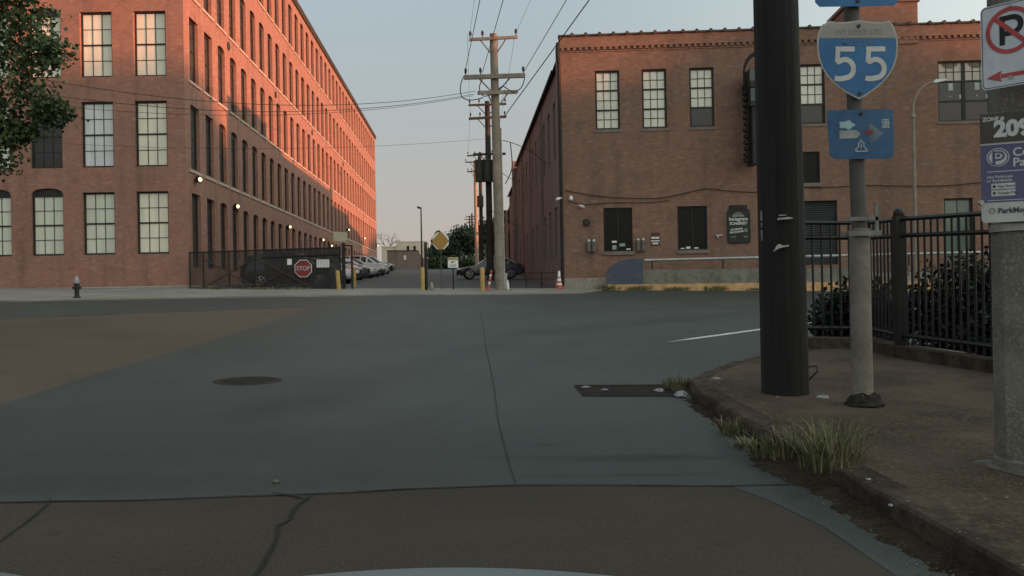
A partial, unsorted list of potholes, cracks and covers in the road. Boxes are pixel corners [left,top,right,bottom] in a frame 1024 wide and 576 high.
manhole cover [212,376,282,385]
drain grate [574,384,676,397]
crack [0,484,782,576]
